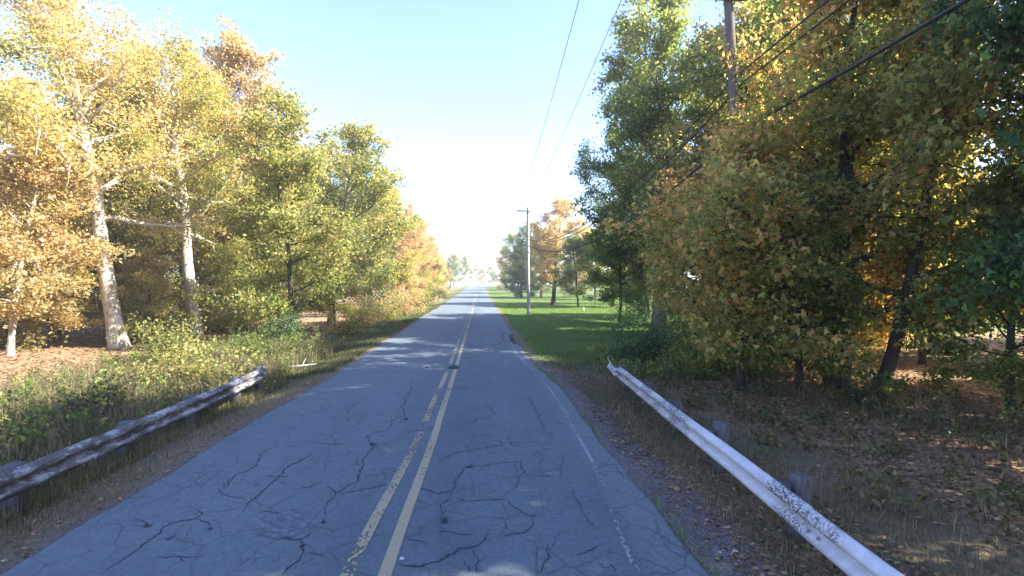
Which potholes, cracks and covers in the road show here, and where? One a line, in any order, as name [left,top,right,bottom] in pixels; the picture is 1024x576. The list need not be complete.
crack [400,404,594,574]
crack [107,388,444,570]
